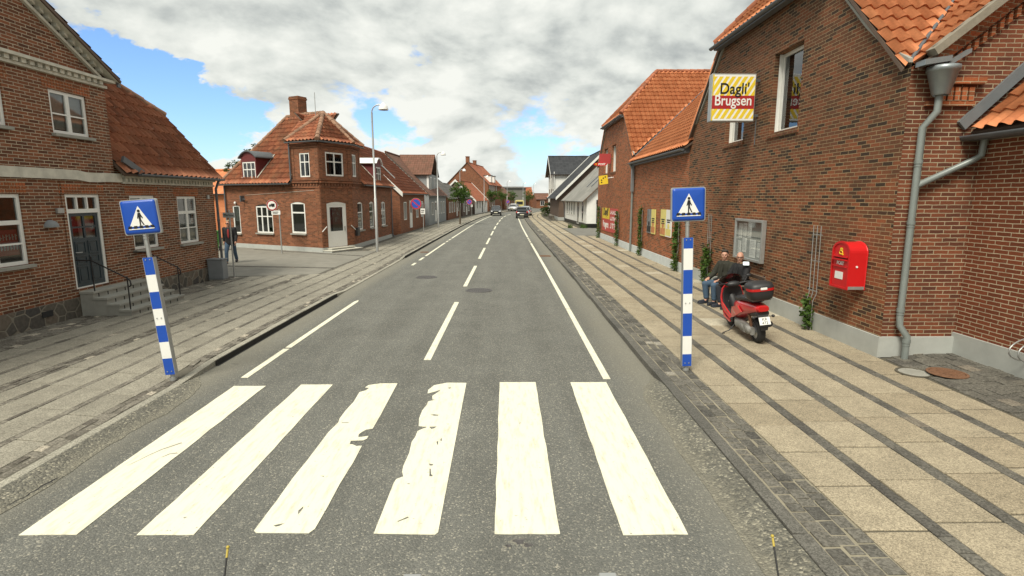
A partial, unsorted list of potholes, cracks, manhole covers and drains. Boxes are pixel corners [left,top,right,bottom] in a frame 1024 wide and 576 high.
manhole cover [925,367,970,379]
manhole cover [894,367,934,378]
crack [0,477,58,510]
pothole [509,538,528,547]
